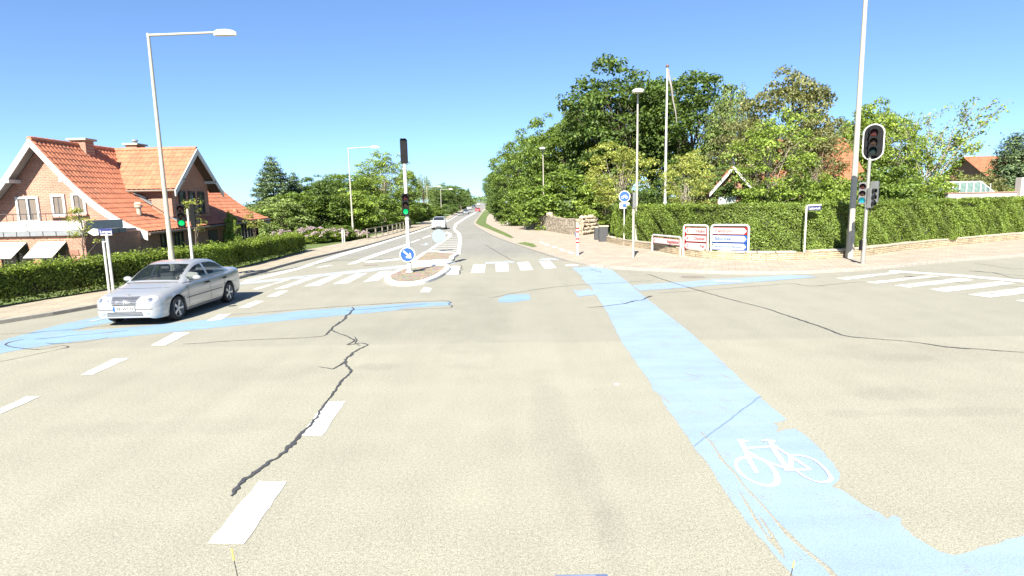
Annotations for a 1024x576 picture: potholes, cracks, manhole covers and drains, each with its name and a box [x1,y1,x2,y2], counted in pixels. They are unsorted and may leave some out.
crack [190,301,453,496]
